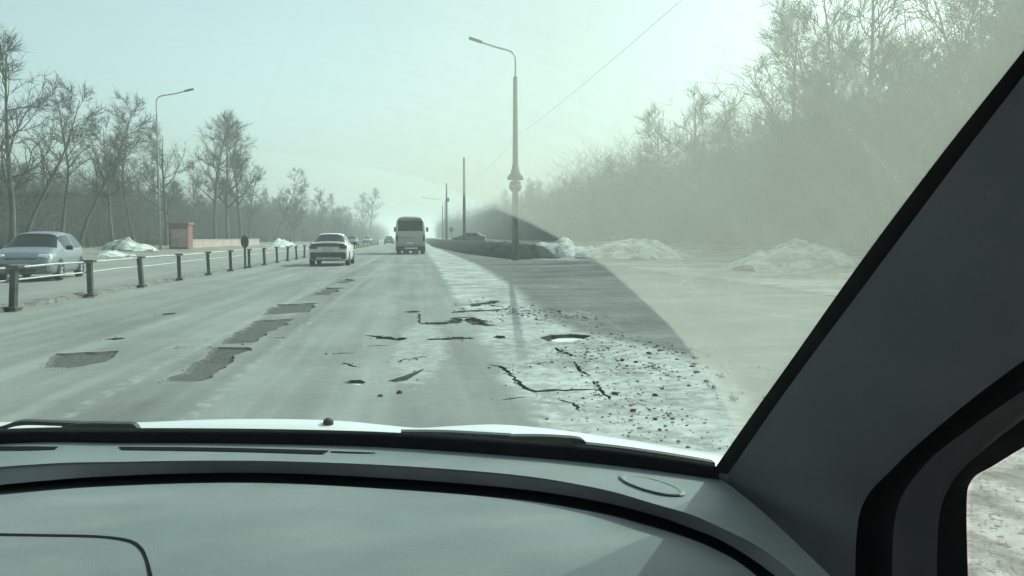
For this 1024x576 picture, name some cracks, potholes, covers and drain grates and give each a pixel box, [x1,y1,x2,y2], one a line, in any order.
crack [491,347,612,411]
pothole [540,334,591,342]
crack [365,301,510,363]
